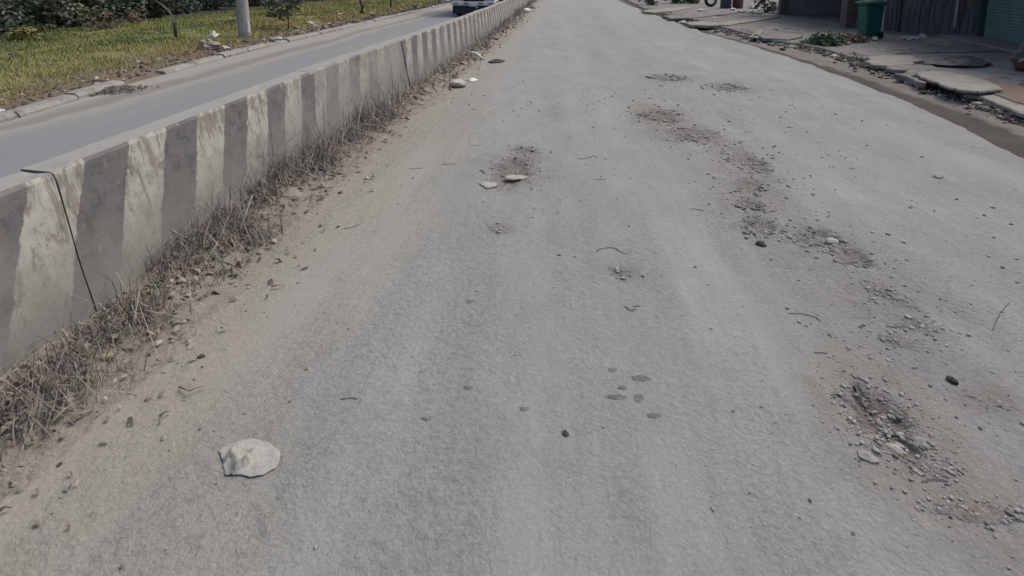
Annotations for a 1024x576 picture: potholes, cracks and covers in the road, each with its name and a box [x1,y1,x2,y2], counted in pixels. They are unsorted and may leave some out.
pothole [733,179,770,195]
pothole [914,459,950,475]
pothole [510,147,539,157]
pothole [829,245,879,269]
pothole [712,83,749,91]
pothole [737,216,782,238]
pothole [734,199,767,210]
pothole [794,228,847,248]
pothole [932,500,1009,525]
pothole [659,126,723,143]
pothole [634,108,684,125]
pothole [832,381,927,471]
